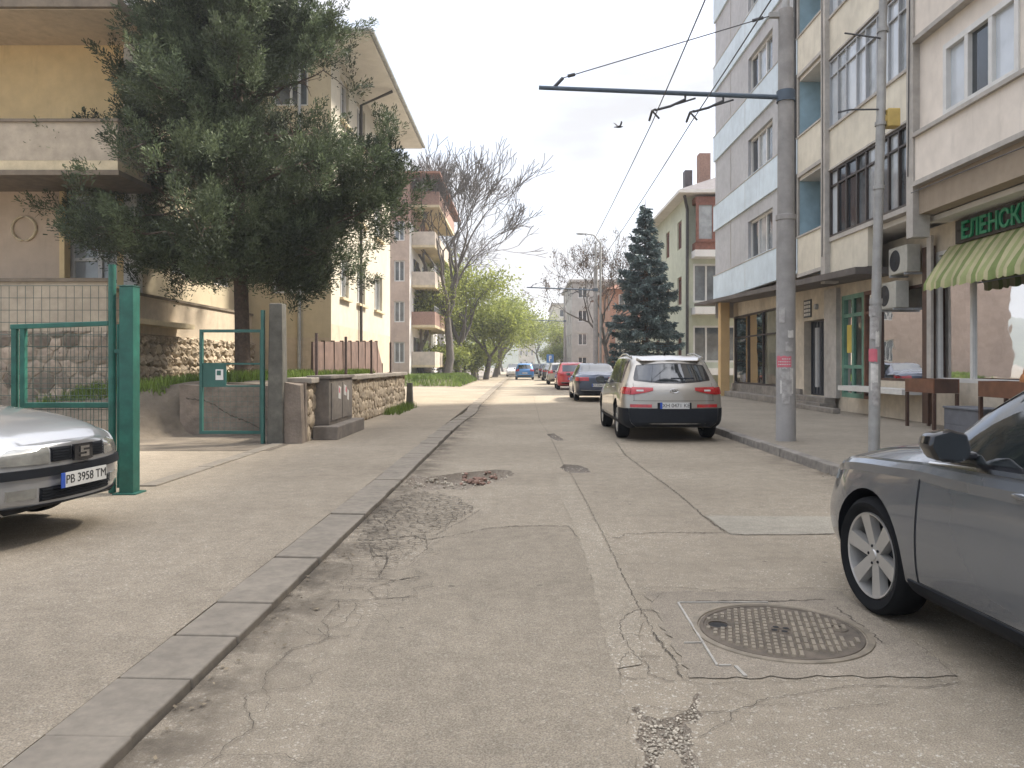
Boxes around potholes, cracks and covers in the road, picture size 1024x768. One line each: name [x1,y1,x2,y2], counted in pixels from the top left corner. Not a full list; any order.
crack [618,587,958,736]
crack [203,491,577,767]
manhole cover [644,590,958,679]
pothole [405,469,514,491]
pothole [631,693,703,768]
